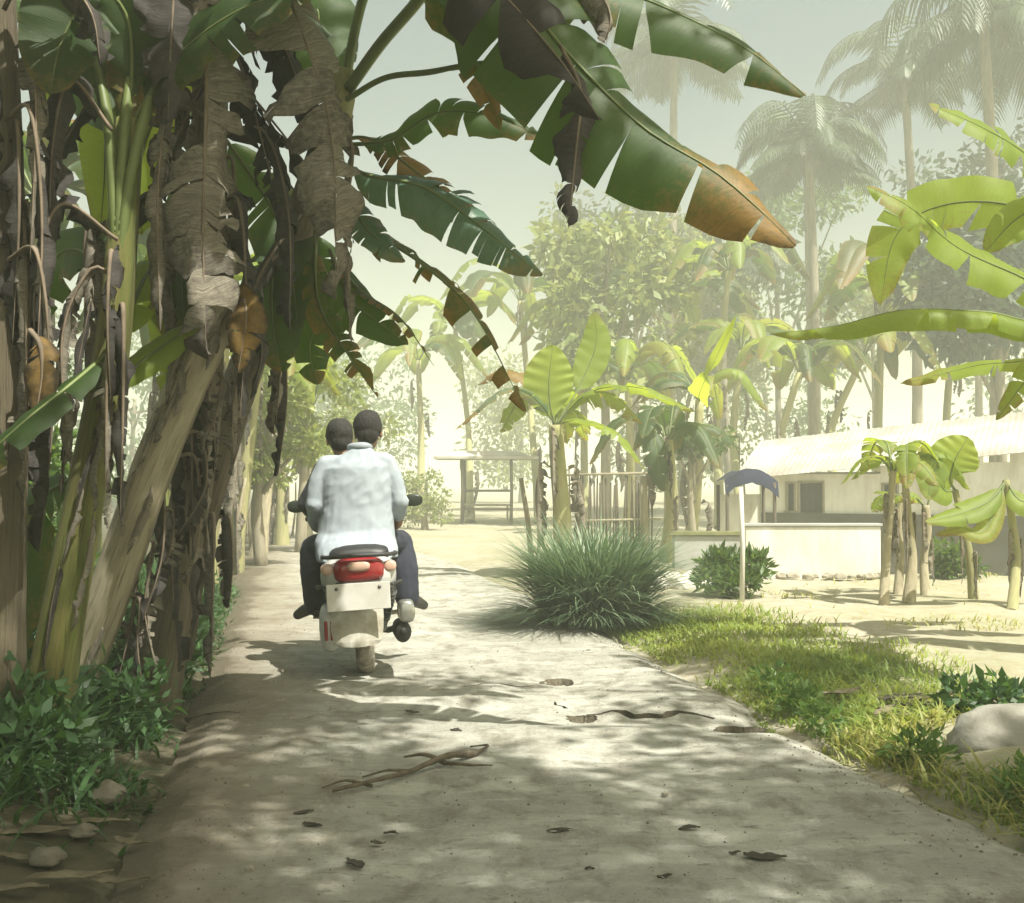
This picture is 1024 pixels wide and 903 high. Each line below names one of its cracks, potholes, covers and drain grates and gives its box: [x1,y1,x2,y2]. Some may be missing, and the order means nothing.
pothole [539,678,574,686]
